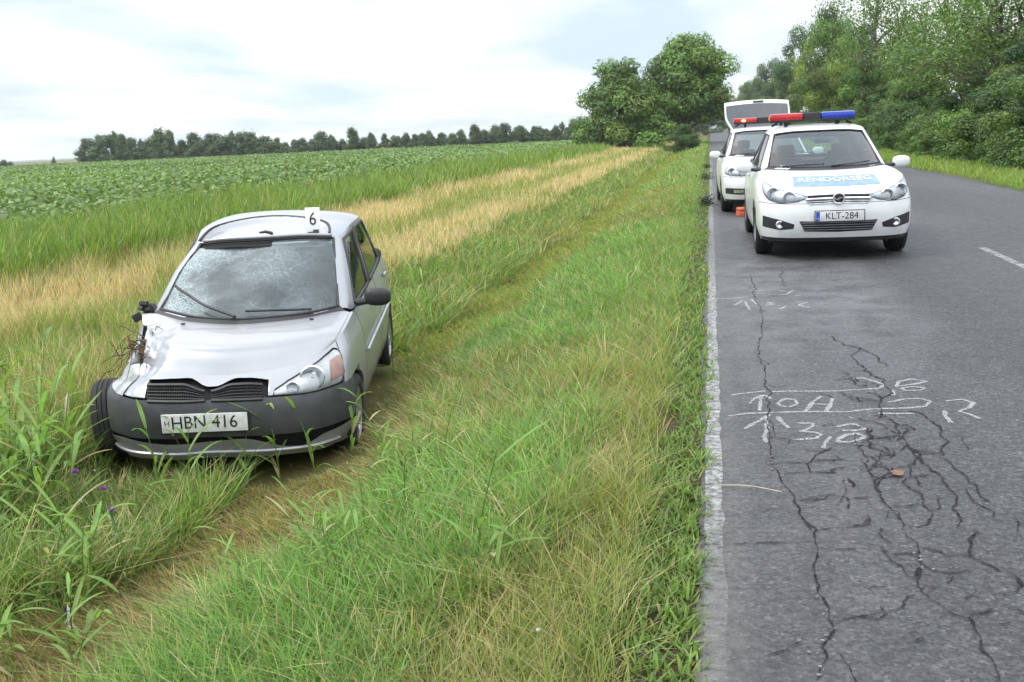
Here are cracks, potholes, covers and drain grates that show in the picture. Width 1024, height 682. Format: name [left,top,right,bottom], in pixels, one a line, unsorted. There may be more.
crack [732,278,1024,682]
